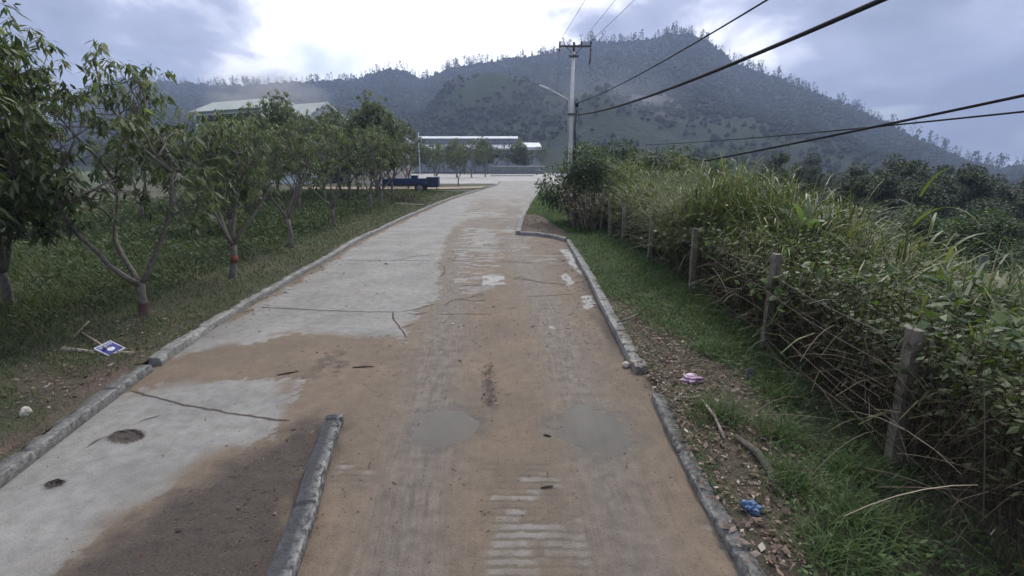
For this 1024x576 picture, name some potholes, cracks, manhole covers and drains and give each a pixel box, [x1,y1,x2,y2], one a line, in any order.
pothole [106,429,145,444]
crack [502,261,568,296]
pothole [44,480,64,489]
crack [132,391,289,422]
crack [265,284,485,337]
